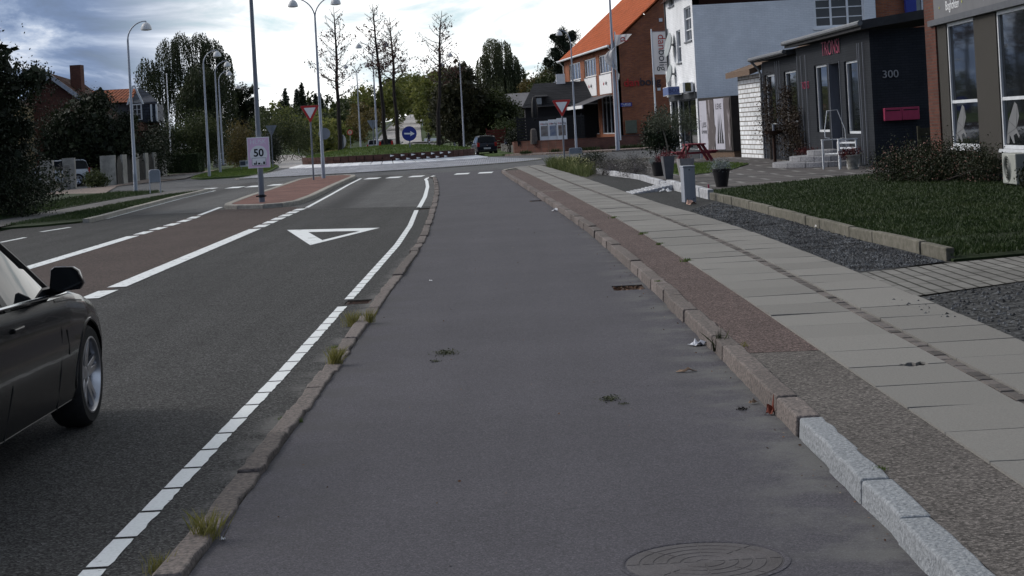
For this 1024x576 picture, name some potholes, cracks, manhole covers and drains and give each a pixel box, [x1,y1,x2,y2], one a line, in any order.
manhole cover [619,541,791,576]
